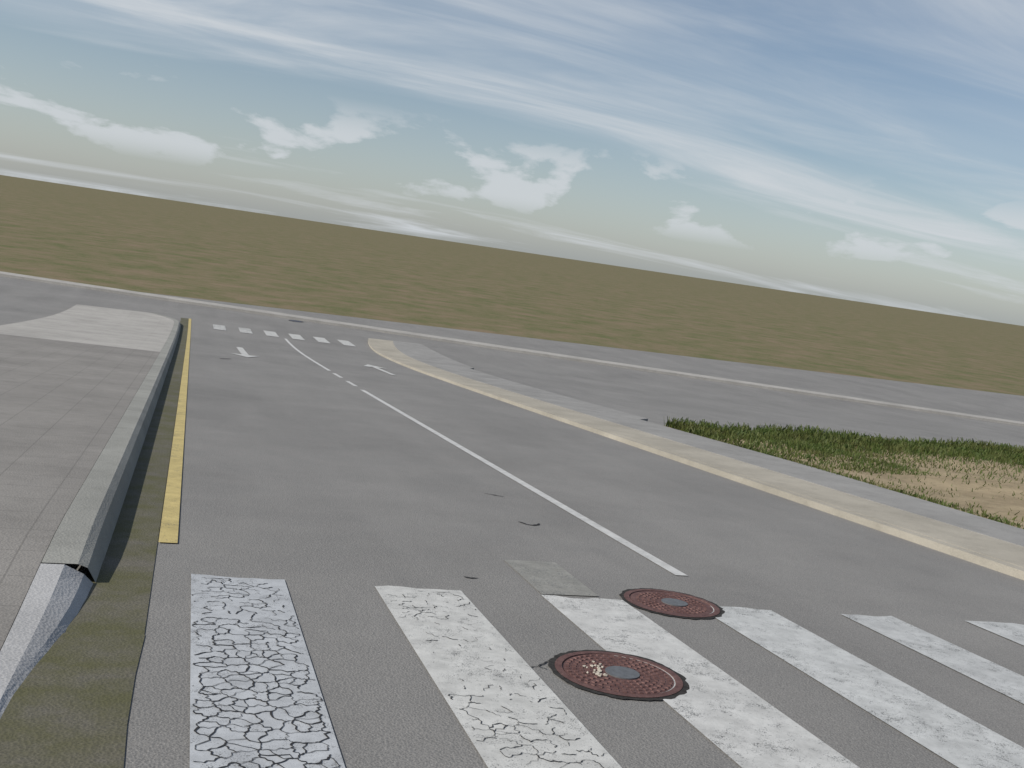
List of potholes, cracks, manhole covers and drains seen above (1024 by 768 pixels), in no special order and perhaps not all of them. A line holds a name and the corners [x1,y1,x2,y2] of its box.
crack [192,577,340,768]
manhole cover [619,588,725,619]
manhole cover [548,650,690,701]
